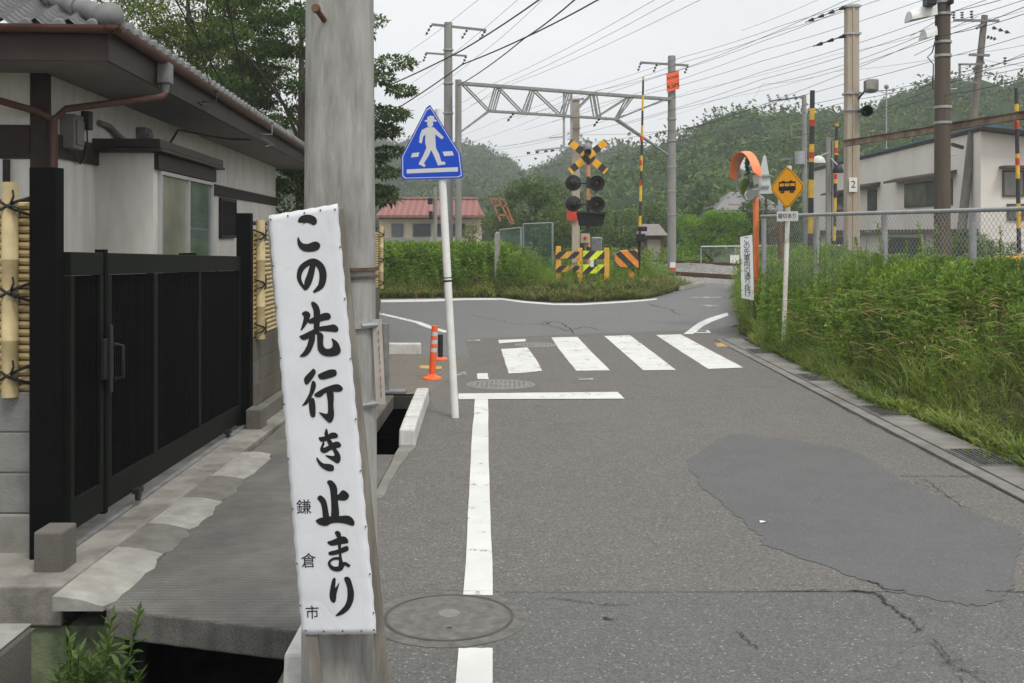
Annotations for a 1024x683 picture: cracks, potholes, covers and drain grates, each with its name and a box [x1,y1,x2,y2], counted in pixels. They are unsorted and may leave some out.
drain grate [946,448,1019,466]
drain grate [795,373,834,381]
crack [403,580,986,683]
drain grate [858,405,911,416]
manhole cover [466,379,535,389]
manhole cover [383,591,528,648]
